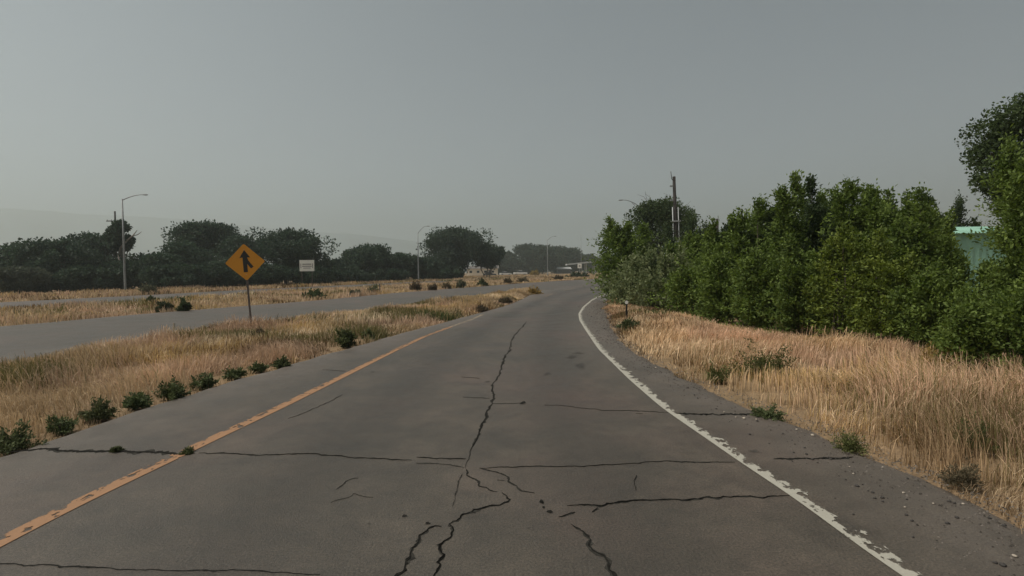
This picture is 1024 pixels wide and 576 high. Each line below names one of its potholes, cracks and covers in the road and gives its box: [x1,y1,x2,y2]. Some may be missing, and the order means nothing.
crack [7,447,180,455]
crack [203,321,790,576]
crack [0,563,320,575]
